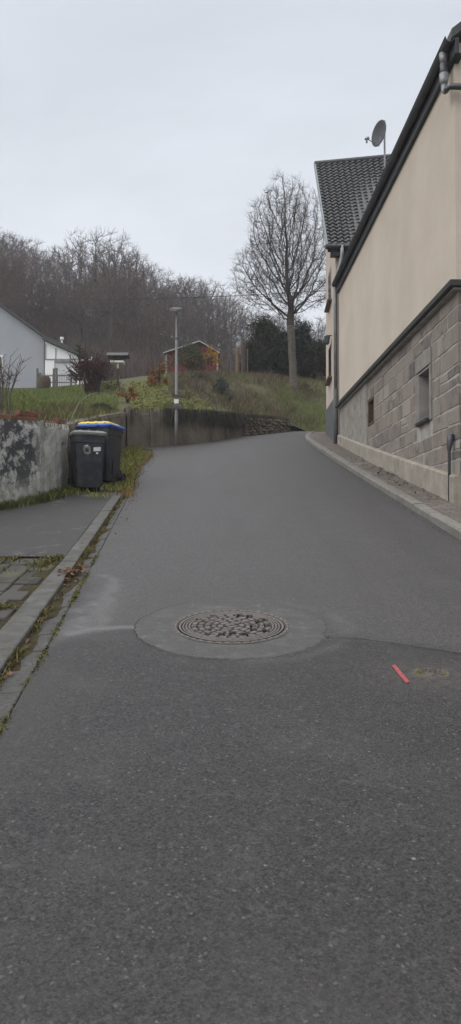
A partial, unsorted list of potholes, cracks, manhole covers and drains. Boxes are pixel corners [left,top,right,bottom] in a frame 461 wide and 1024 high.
manhole cover [172,609,291,644]
